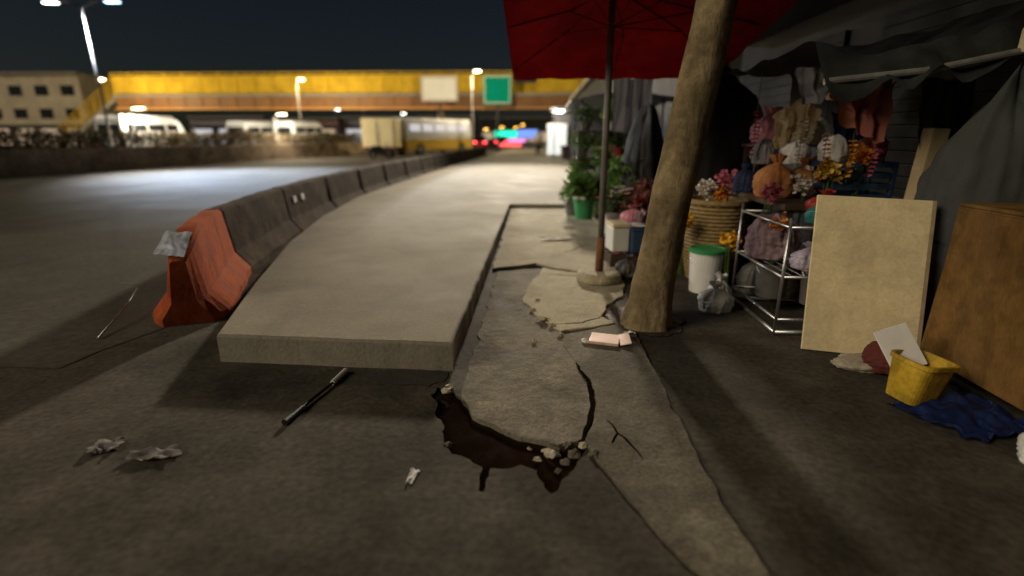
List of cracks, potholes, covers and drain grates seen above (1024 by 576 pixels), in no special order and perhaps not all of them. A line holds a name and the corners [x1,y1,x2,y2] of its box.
crack [499,247,591,276]
crack [575,363,643,459]
pothole [431,387,586,494]
